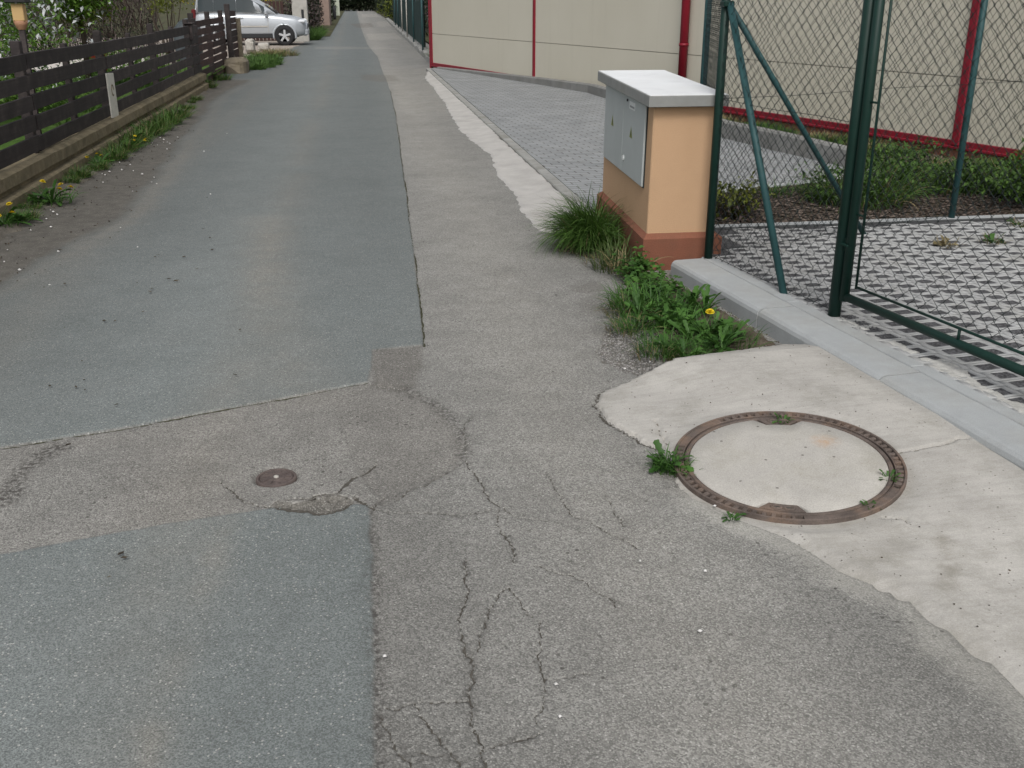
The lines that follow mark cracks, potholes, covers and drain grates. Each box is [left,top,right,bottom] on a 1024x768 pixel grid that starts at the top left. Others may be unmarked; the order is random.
utility cover [256,468,297,488]
crack [403,418,546,563]
crack [546,475,646,551]
crack [380,562,590,768]
manhole cover [673,411,908,525]
